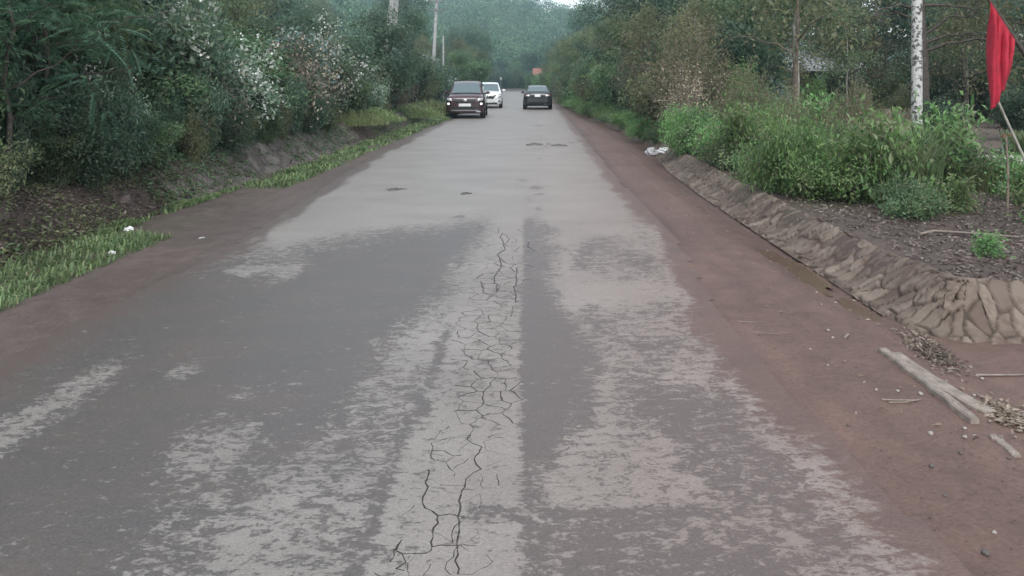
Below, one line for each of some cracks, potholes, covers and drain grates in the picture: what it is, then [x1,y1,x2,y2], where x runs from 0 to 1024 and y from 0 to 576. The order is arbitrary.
crack [374,228,535,576]
